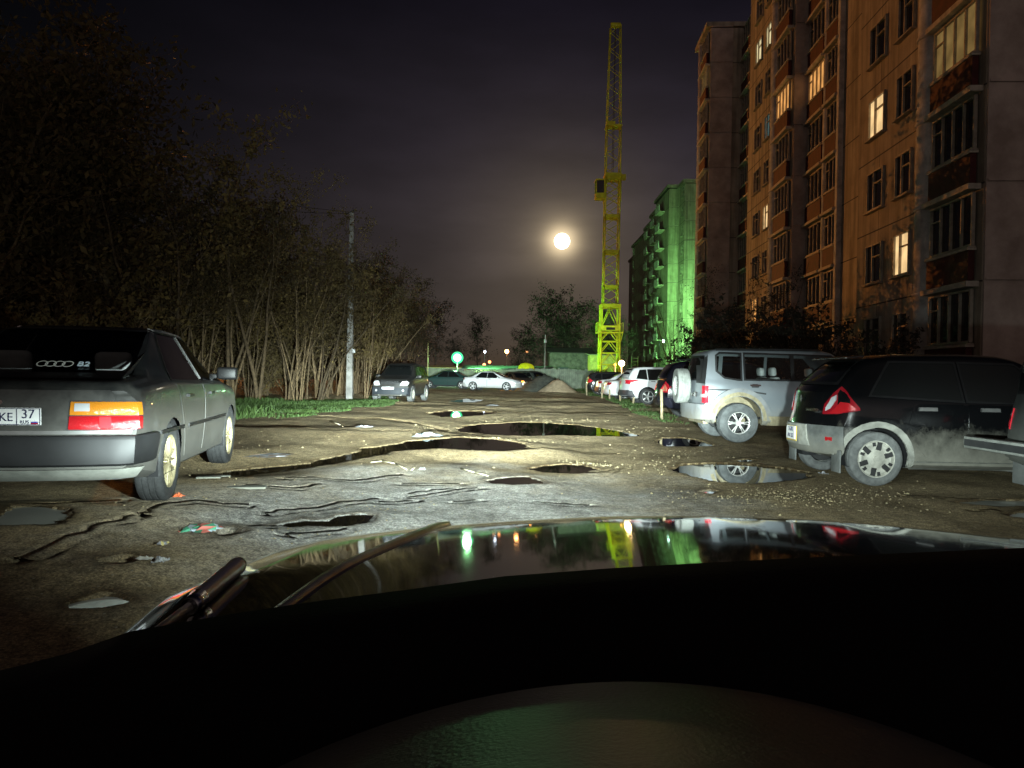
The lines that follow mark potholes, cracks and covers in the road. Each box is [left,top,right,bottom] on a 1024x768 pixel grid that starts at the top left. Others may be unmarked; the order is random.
pothole [201,436,547,476]
crack [0,473,481,561]
pothole [472,474,560,487]
pothole [656,461,826,486]
pothole [448,421,648,437]
pothole [249,510,394,530]
pothole [516,462,614,475]
pothole [648,436,728,448]
